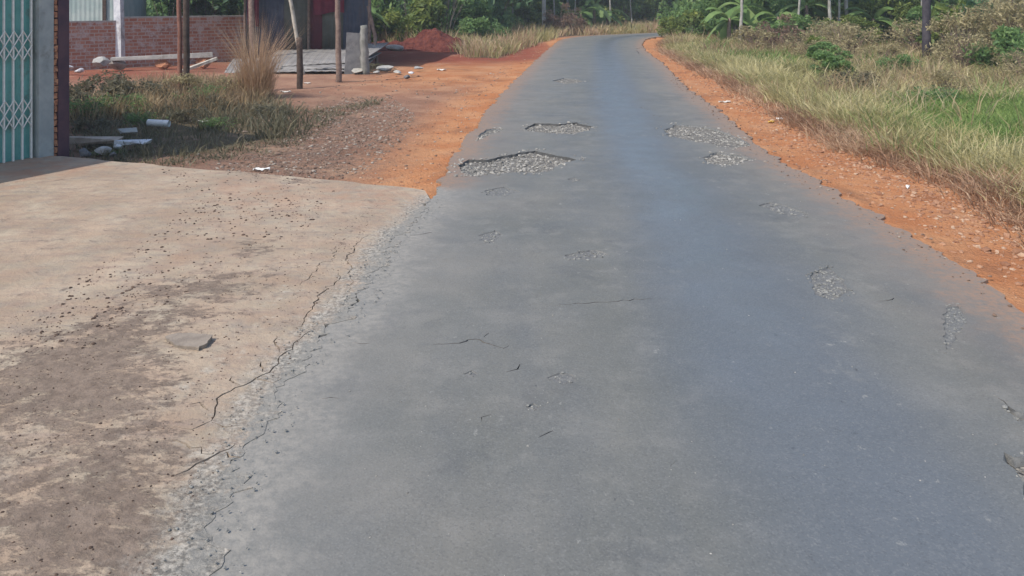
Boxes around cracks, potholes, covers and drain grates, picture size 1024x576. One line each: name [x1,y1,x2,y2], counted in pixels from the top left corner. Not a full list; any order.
pothole [699,151,756,167]
pothole [520,121,595,135]
crack [167,235,368,475]
pothole [806,265,855,301]
pothole [656,122,753,150]
pothole [942,303,967,353]
pothole [481,187,519,197]
crack [450,335,520,371]
pothole [448,148,586,177]
pothole [475,127,503,141]
pothole [564,250,609,260]
pothole [479,230,502,244]
